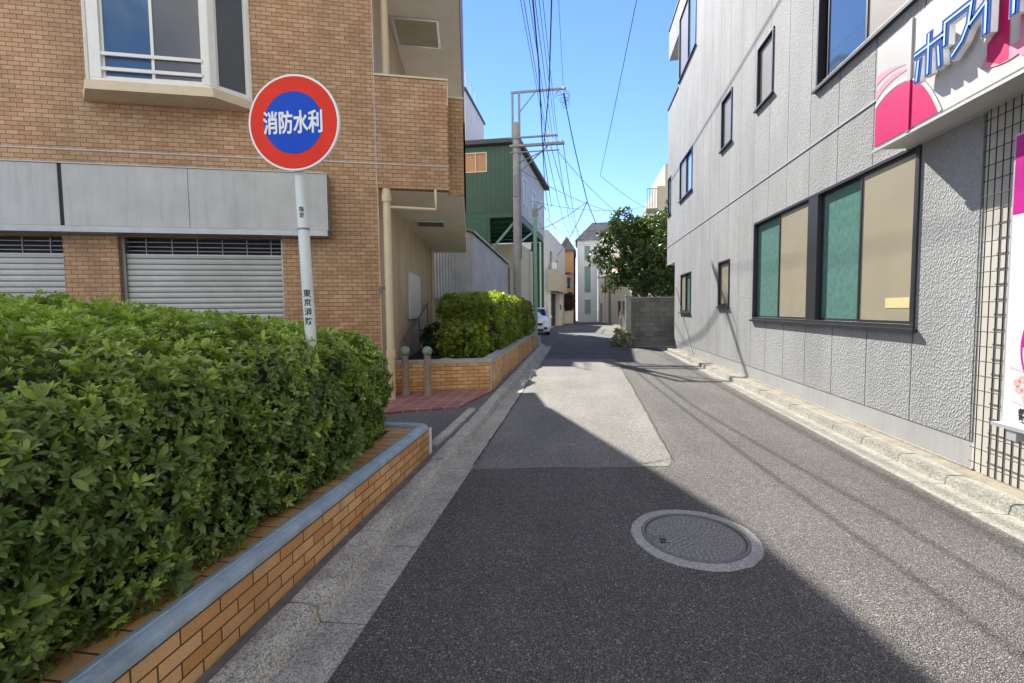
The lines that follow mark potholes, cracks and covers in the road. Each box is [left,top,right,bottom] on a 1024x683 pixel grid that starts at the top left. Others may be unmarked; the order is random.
manhole cover [631,509,765,572]
